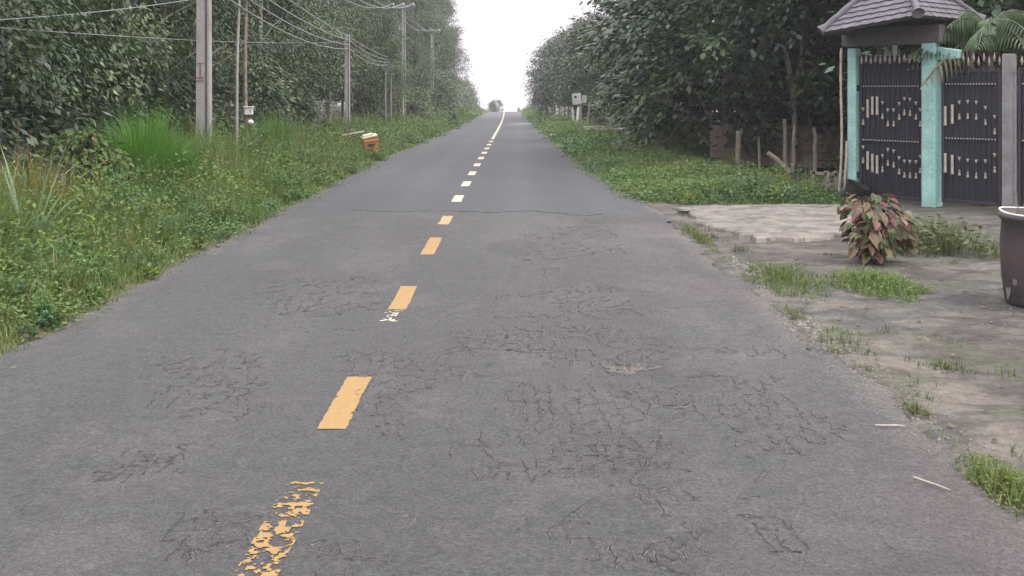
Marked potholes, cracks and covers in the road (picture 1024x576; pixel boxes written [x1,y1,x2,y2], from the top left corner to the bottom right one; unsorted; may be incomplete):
crack [90,442,198,483]
crack [161,509,263,567]
crack [333,210,893,575]
pothole [601,362,661,375]
crack [138,349,272,423]
